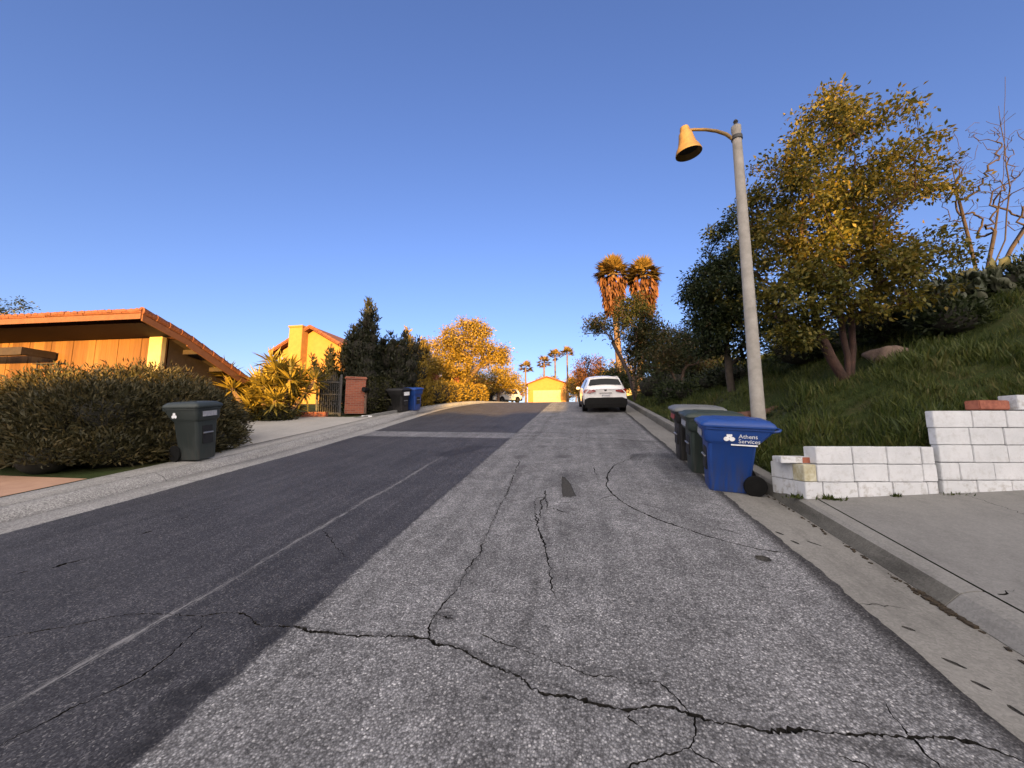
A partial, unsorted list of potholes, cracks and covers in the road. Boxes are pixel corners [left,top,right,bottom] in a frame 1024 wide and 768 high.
crack [8,459,1023,768]
